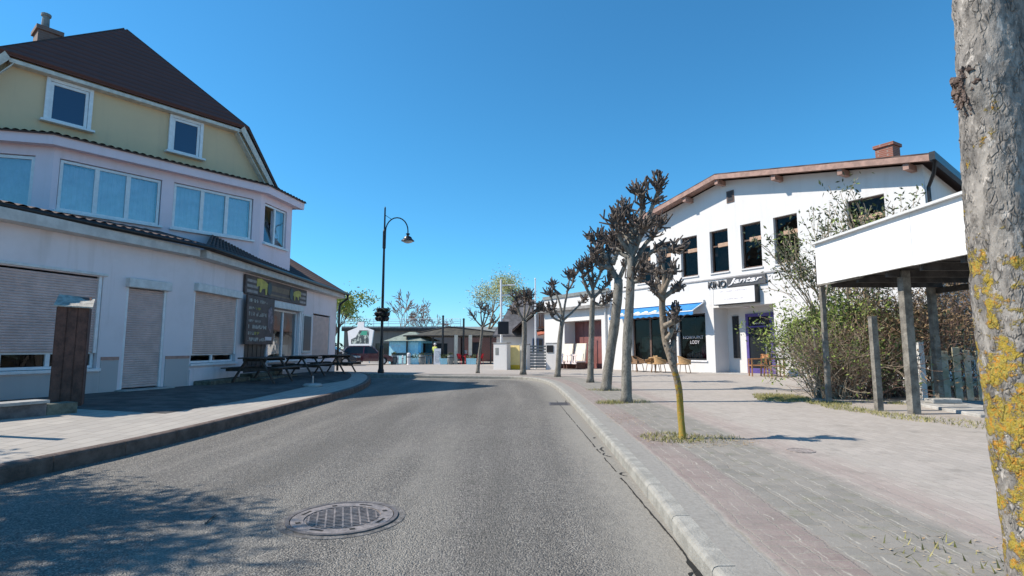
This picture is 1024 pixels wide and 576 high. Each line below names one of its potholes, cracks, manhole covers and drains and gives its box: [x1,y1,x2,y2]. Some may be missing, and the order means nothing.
manhole cover [276,501,405,540]
